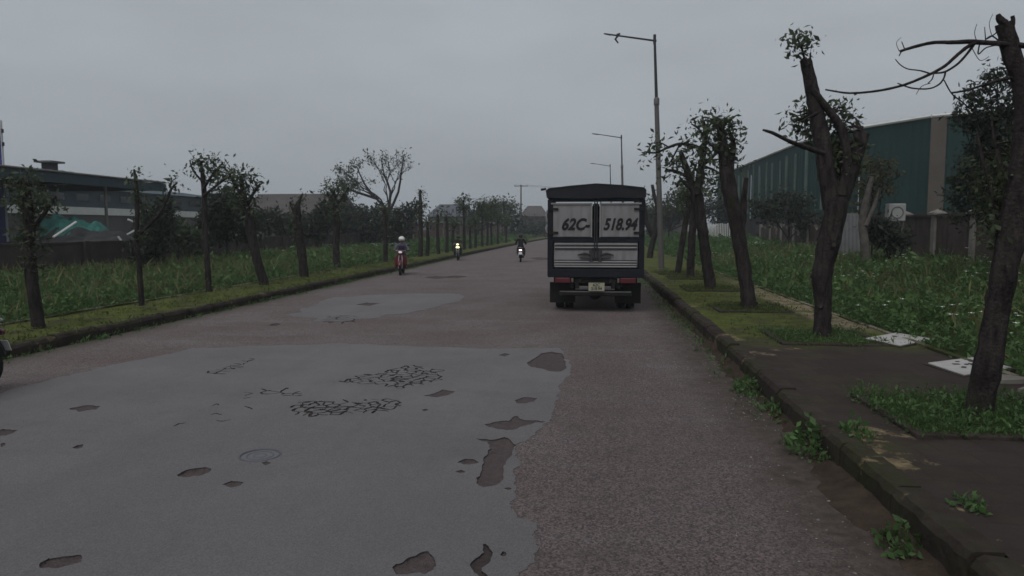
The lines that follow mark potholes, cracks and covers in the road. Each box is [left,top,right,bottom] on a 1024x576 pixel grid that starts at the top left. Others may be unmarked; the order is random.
utility cover [923,357,1016,378]
utility cover [866,333,936,348]
pothole [527,352,566,371]
pothole [477,437,516,487]
pothole [393,551,436,574]
pothole [177,468,211,477]
crack [244,365,443,417]
manhole cover [238,448,282,462]
pothole [486,417,543,430]
pothole [39,555,82,568]
